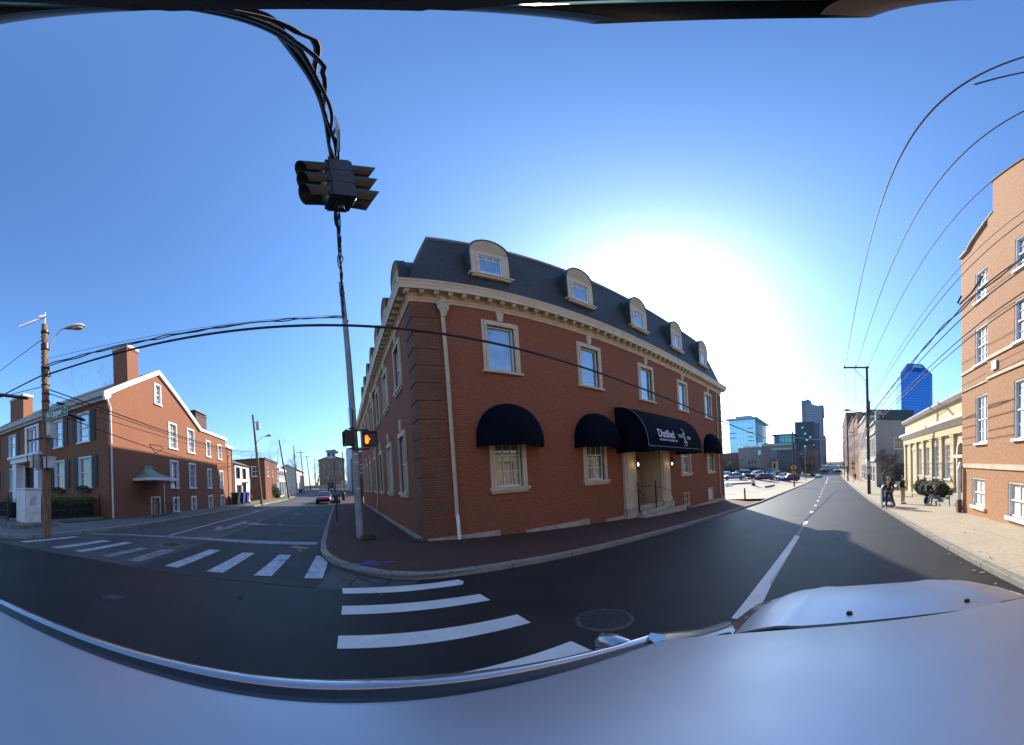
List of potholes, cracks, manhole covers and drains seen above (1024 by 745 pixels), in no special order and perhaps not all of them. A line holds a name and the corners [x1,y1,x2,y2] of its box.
manhole cover [574,609,634,632]
crack [340,570,400,587]
